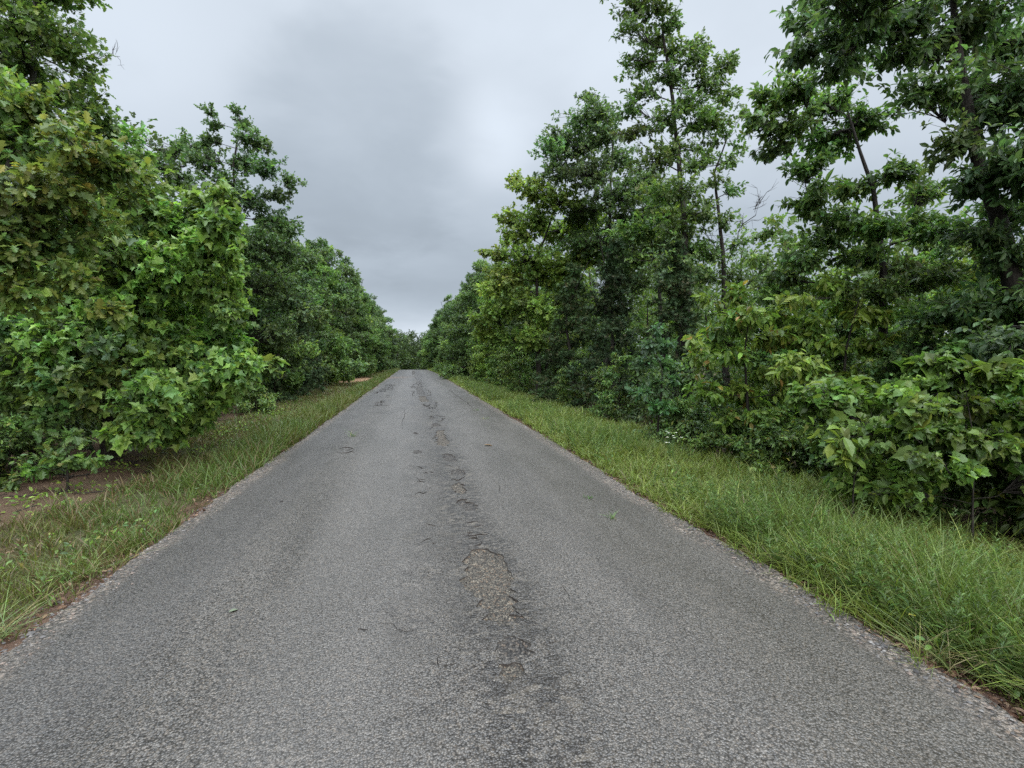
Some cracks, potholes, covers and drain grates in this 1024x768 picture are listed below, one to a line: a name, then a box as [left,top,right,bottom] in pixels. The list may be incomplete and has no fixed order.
pothole [459,549,526,626]
pothole [435,430,450,446]
crack [373,379,468,428]
pothole [498,662,525,682]
pothole [495,636,534,662]
pothole [456,499,478,511]
